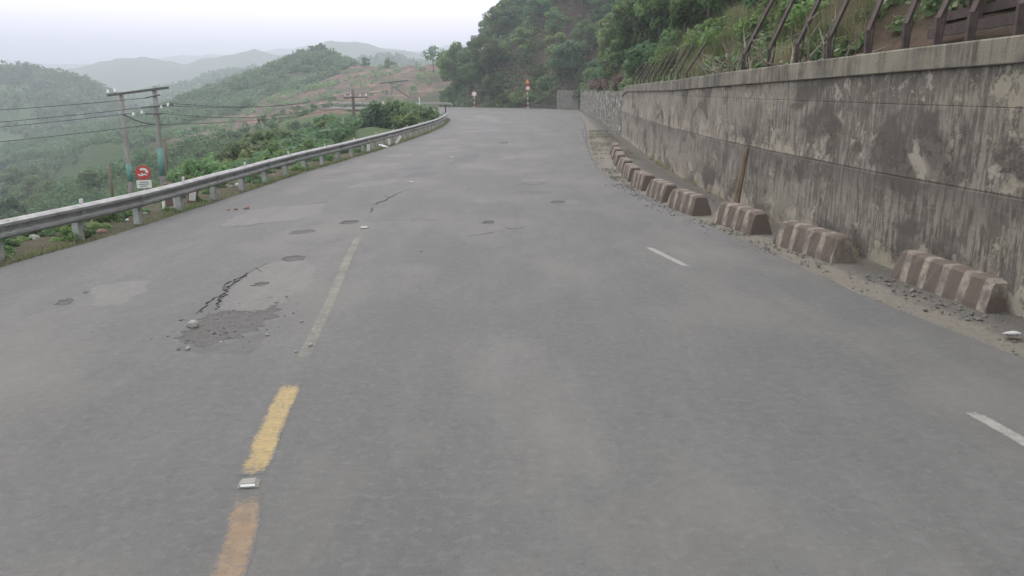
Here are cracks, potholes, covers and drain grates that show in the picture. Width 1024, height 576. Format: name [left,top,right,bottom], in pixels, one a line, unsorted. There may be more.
crack [196,266,261,314]
pothole [175,302,282,347]
